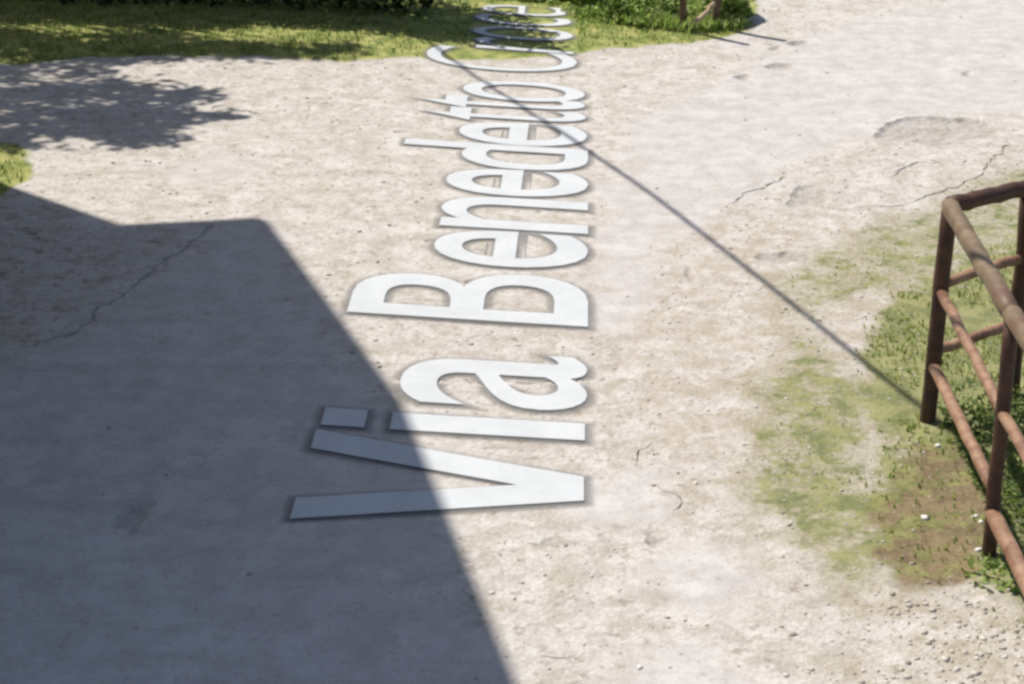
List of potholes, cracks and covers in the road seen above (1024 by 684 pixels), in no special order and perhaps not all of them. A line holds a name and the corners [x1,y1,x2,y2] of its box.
crack [728,176,785,204]
crack [865,140,1010,207]
crack [27,224,213,348]
pothole [762,62,796,70]
